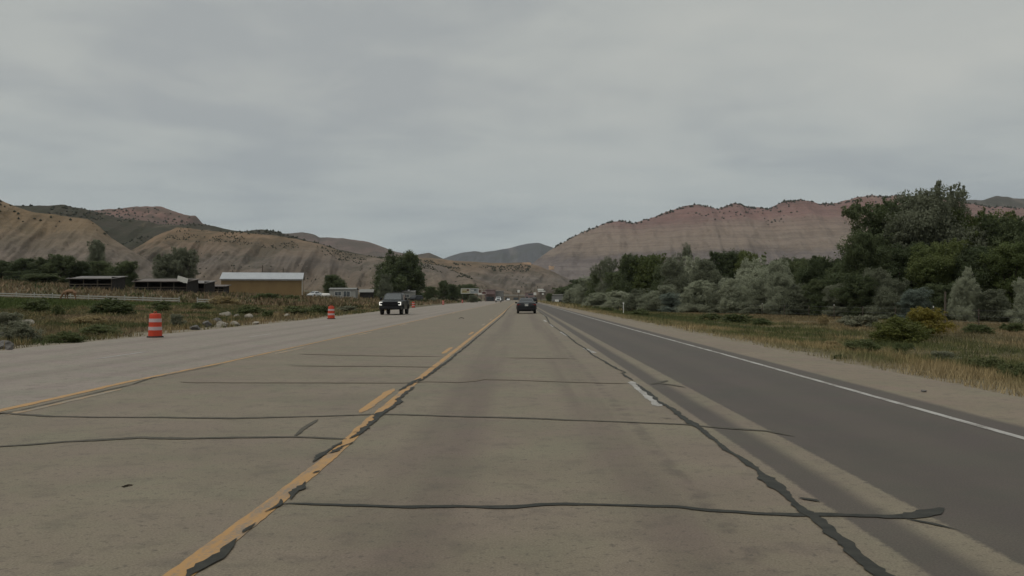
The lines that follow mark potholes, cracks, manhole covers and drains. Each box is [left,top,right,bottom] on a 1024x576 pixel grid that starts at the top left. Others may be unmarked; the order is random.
crack [0,306,959,576]
